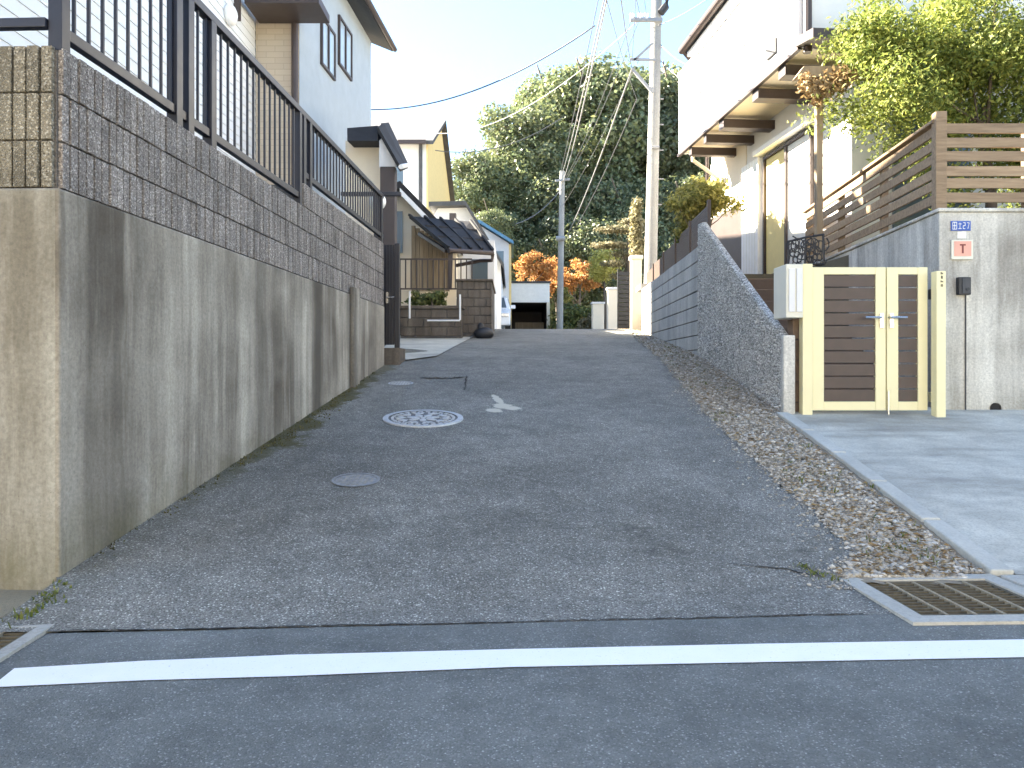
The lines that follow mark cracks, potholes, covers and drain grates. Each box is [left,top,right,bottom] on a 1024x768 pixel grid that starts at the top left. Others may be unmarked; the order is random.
manhole cover [383,410,463,428]
crack [734,560,821,576]
manhole cover [331,473,380,486]
drain grate [839,574,1024,626]
